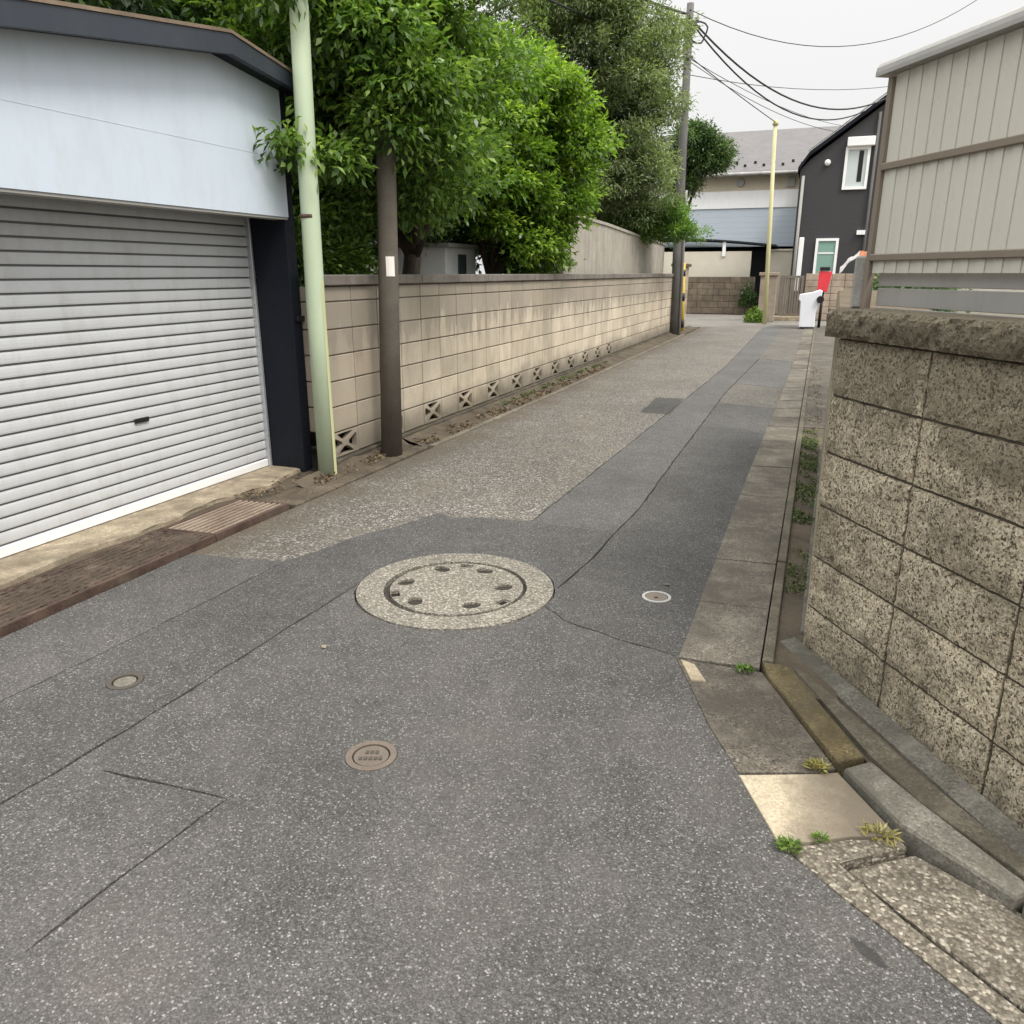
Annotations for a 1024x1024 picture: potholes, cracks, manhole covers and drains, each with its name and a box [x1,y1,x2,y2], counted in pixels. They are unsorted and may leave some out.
manhole cover [106,672,144,690]
drain grate [160,499,289,542]
crack [553,362,756,591]
manhole cover [356,553,553,631]
manhole cover [642,591,671,603]
manhole cover [345,740,397,771]
